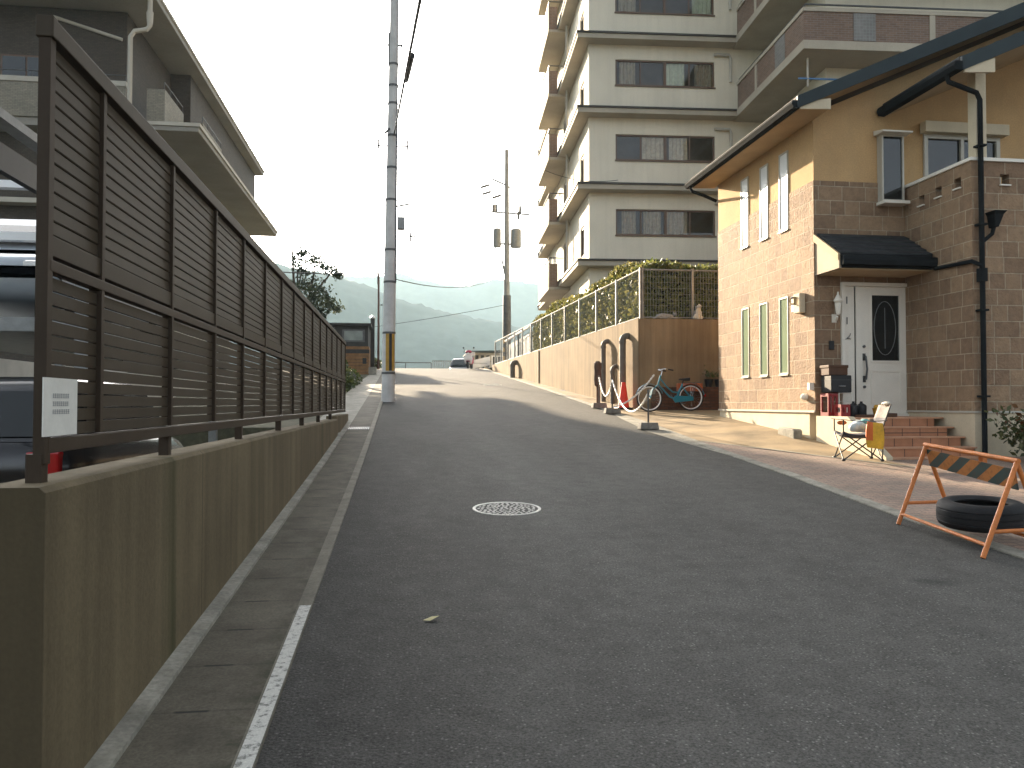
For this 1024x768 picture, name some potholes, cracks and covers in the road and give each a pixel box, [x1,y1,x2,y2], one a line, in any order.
manhole cover [473,502,541,516]
